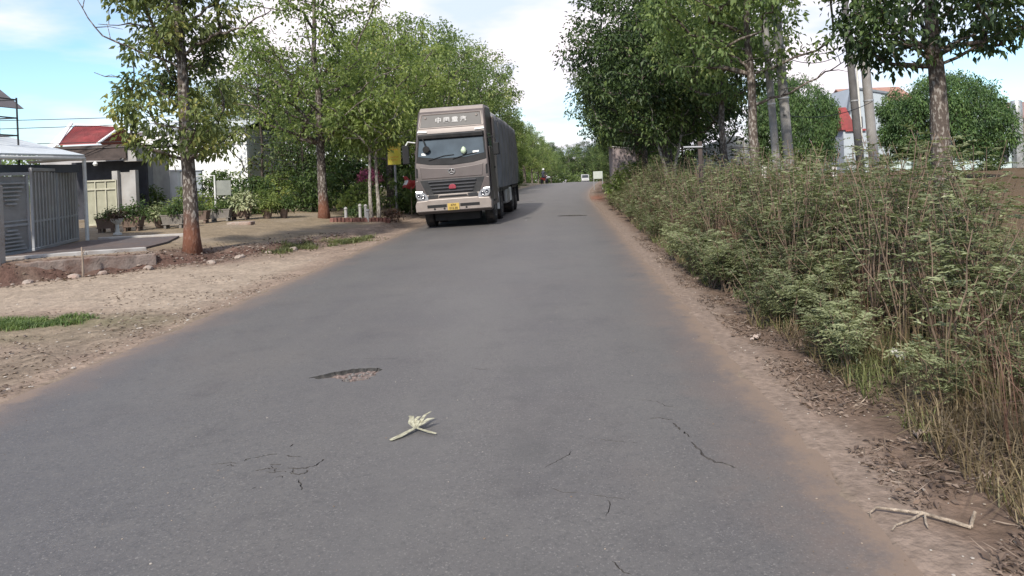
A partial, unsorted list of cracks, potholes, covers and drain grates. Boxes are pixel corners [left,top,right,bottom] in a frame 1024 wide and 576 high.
crack [637,399,736,468]
crack [211,444,324,490]
pothole [310,368,383,382]
crack [553,488,622,514]
